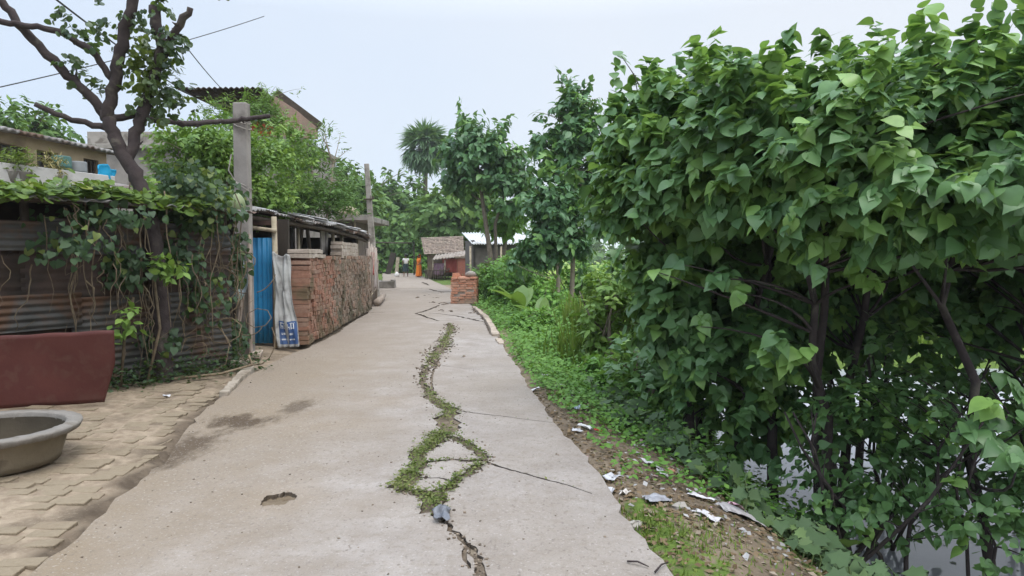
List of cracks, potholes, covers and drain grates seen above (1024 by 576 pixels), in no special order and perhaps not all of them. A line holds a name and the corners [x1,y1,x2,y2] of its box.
crack [385,283,490,334]
crack [390,325,589,576]
pothole [260,492,296,506]
